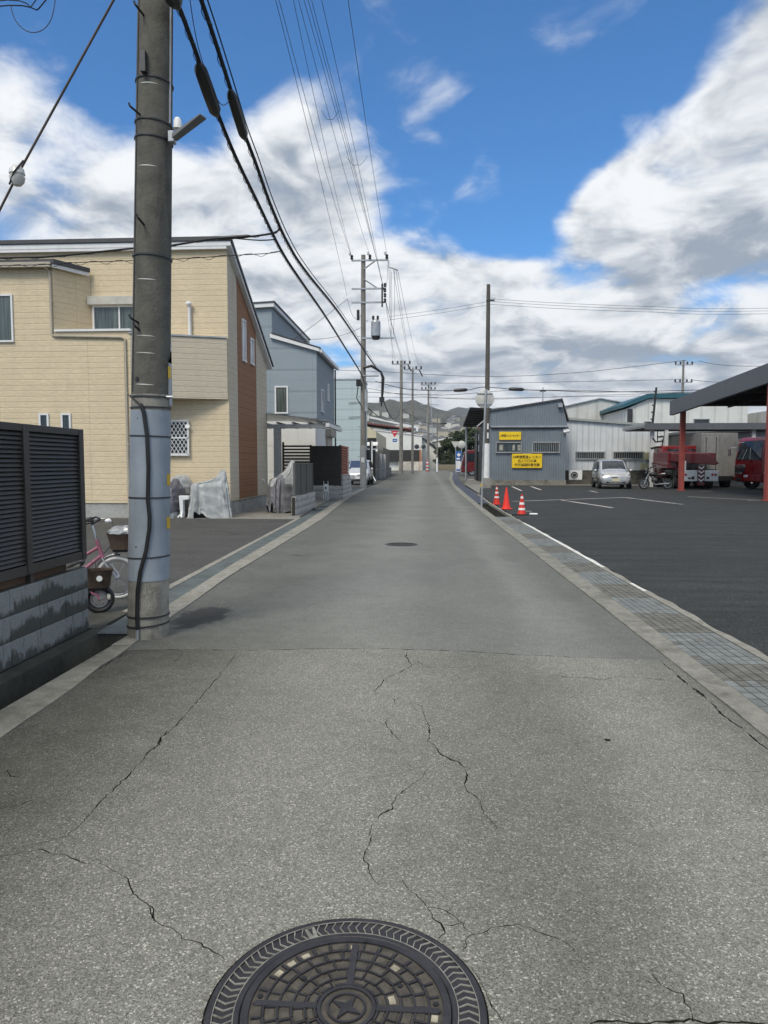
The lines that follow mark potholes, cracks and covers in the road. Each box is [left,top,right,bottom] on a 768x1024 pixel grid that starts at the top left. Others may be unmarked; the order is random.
crack [166,648,767,749]
crack [28,657,234,846]
manhole cover [203,919,487,1024]
crack [591,973,768,1024]
crack [363,705,497,885]
crack [402,880,576,952]
crack [18,849,225,960]
